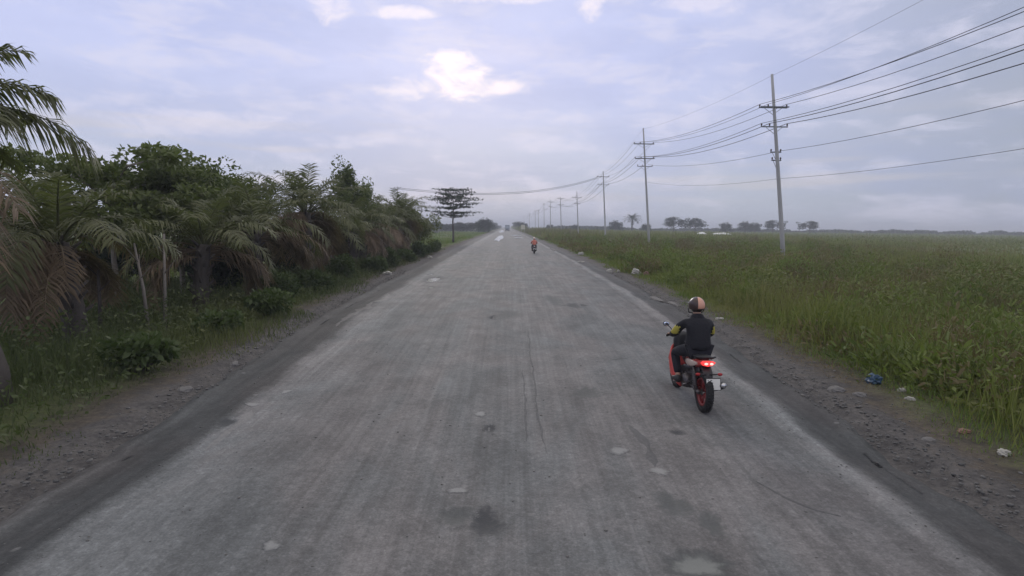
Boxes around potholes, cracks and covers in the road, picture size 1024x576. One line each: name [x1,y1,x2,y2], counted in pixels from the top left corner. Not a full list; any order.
crack [756,481,841,517]
crack [522,328,547,452]
pothole [482,423,498,435]
